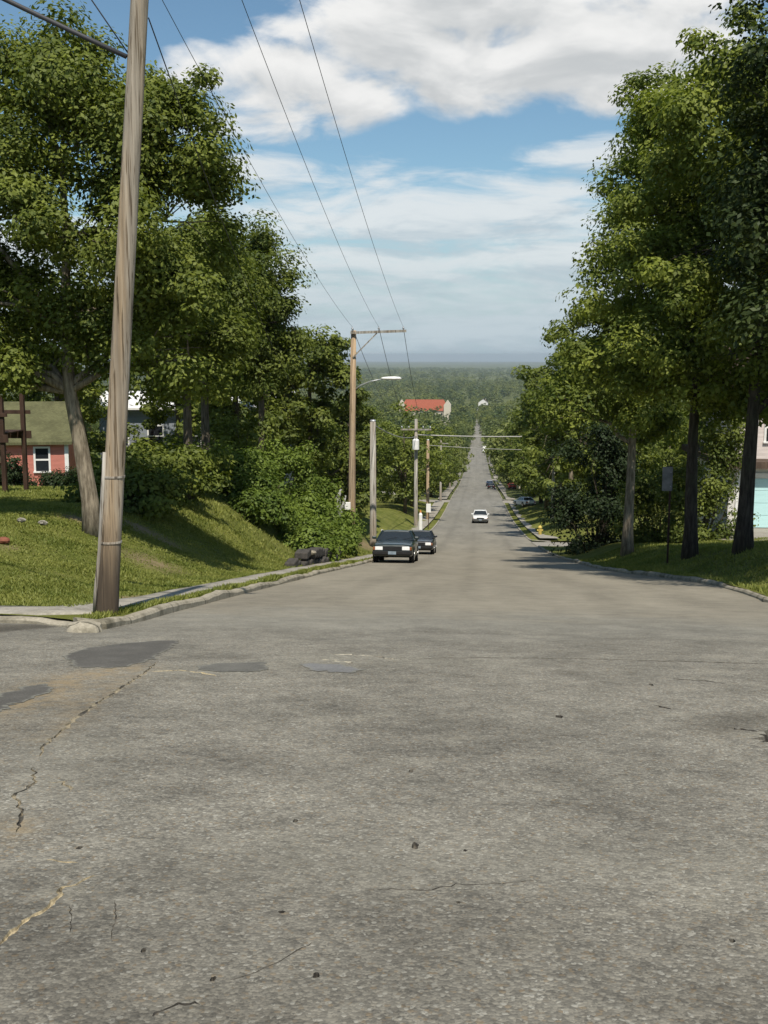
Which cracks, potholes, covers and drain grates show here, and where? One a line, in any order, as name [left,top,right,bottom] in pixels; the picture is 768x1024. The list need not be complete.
crack [152,1001,200,1016]
crack [230,942,312,980]
crack [372,880,533,891]
crack [0,859,117,945]
crack [11,662,216,832]
